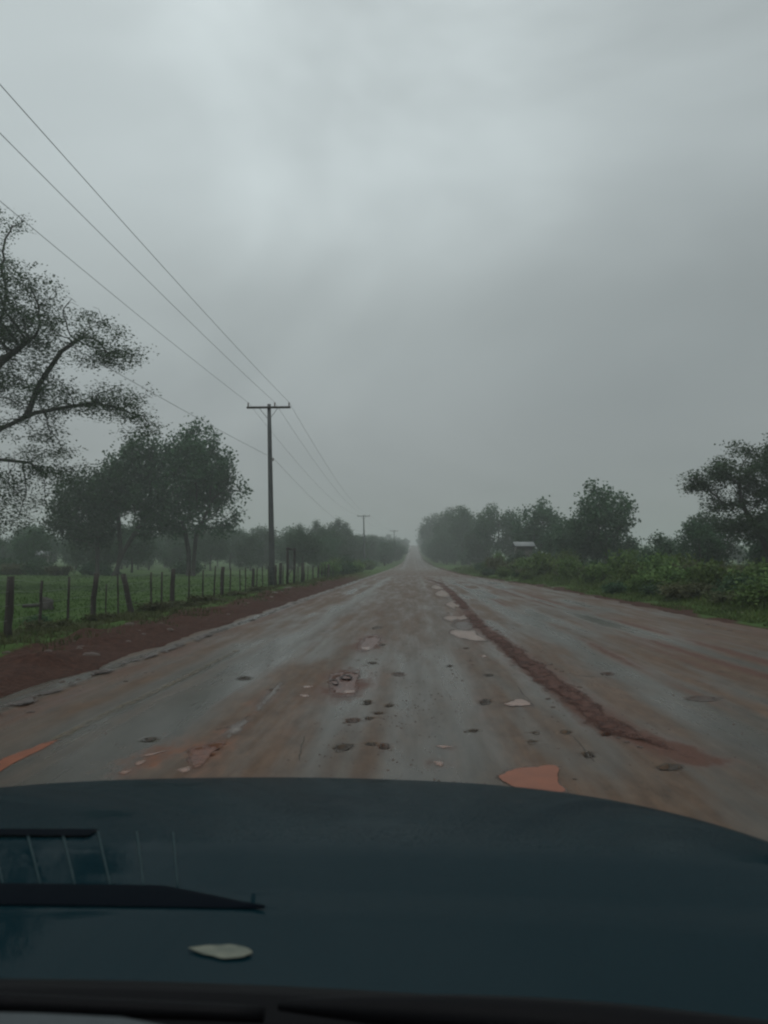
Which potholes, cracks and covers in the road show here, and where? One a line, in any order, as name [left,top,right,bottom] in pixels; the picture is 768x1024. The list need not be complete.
pothole [186,741,225,768]
pothole [329,670,360,697]
